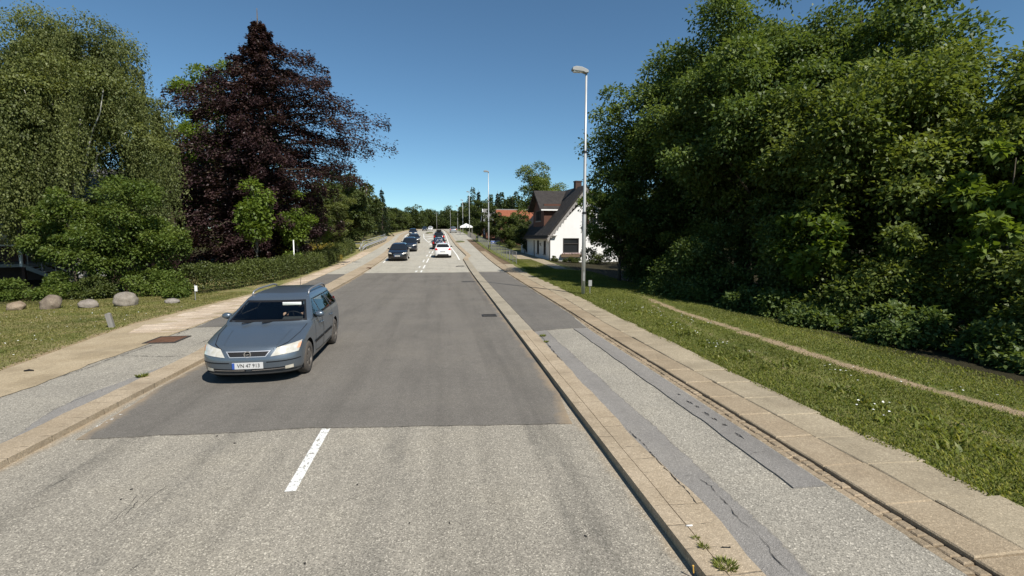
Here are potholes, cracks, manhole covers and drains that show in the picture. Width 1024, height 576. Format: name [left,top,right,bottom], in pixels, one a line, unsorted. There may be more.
manhole cover [142,335,192,344]
